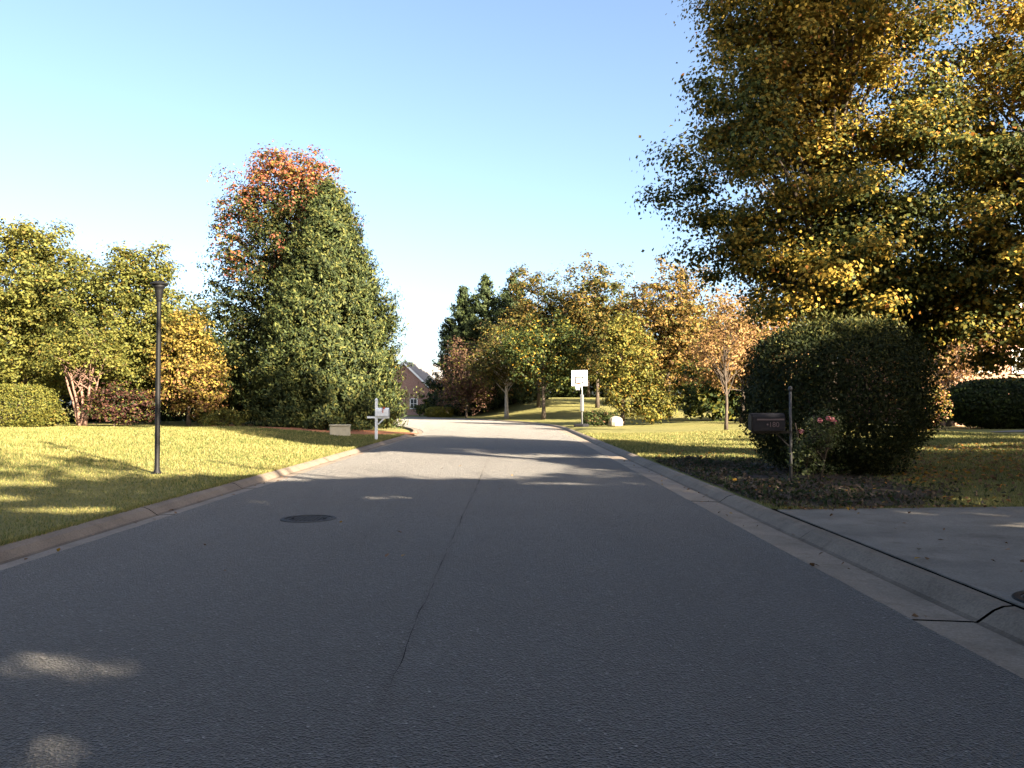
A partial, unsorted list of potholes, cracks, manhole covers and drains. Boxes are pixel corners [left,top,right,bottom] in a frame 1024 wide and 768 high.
crack [388,476,481,689]
manhole cover [280,515,337,523]
manhole cover [1011,590,1024,603]
